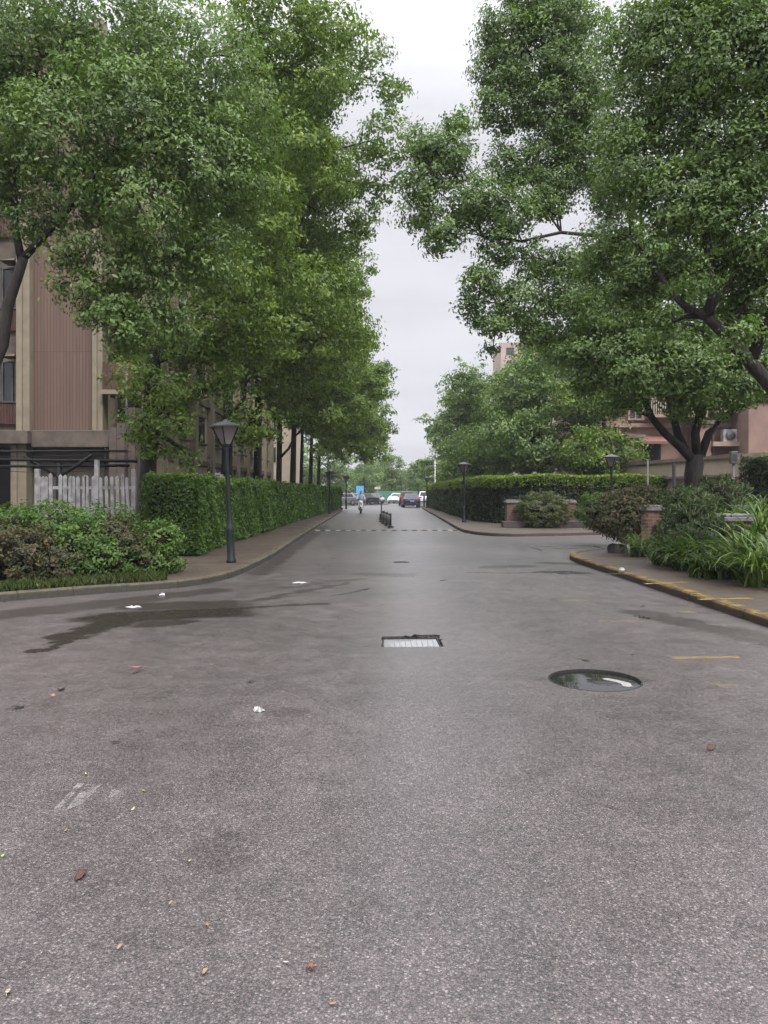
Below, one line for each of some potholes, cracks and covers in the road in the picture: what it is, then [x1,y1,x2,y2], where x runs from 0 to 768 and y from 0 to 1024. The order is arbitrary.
manhole cover [548,669,643,692]
